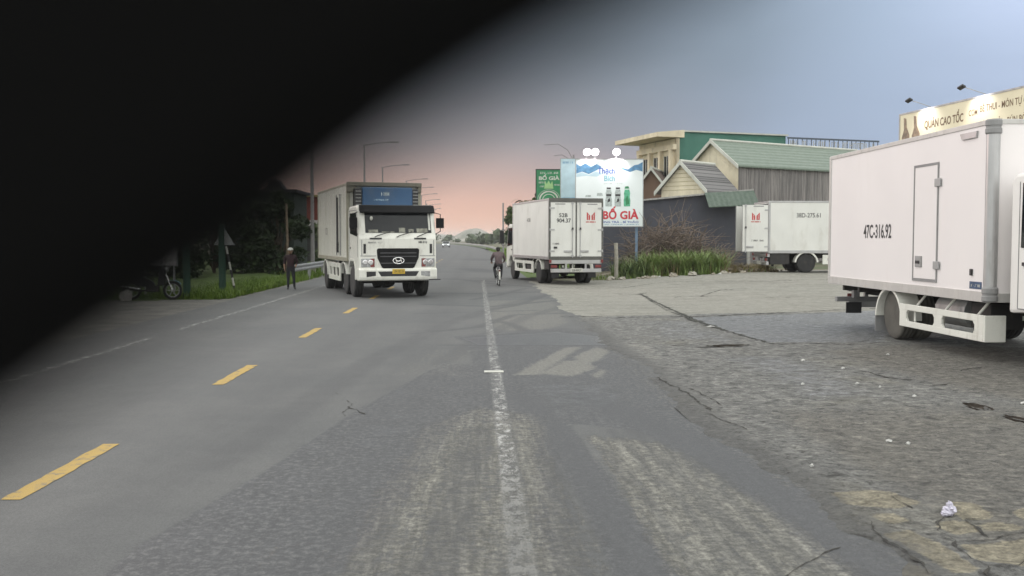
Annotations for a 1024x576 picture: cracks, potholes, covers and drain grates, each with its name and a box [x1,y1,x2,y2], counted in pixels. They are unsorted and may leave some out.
crack [786,547,840,576]
pothole [958,402,996,411]
